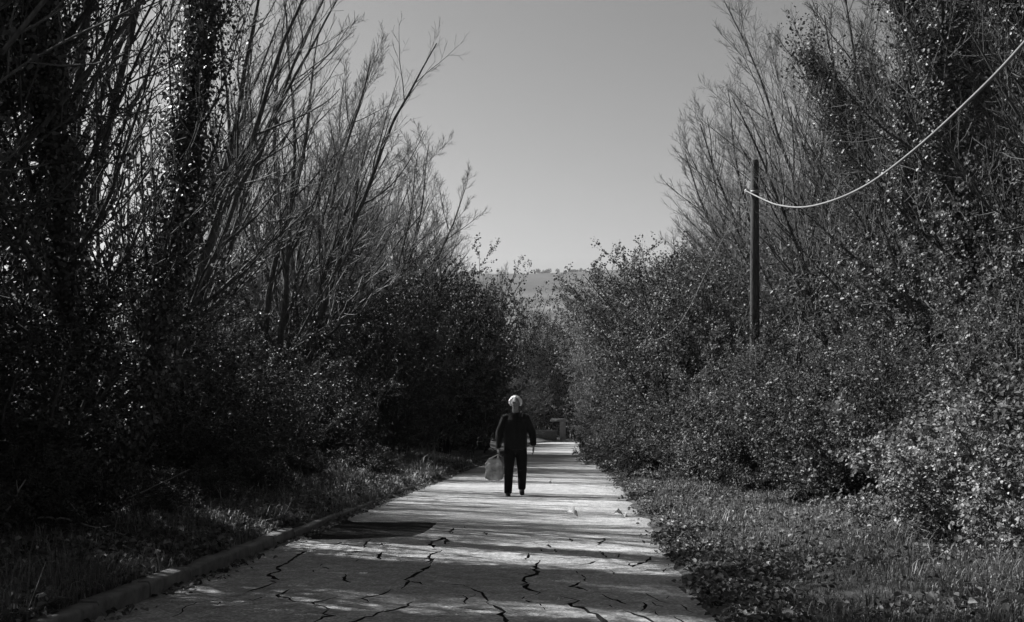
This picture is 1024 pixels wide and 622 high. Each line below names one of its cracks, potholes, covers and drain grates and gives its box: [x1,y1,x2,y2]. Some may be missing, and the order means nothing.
crack [243,527,693,622]
